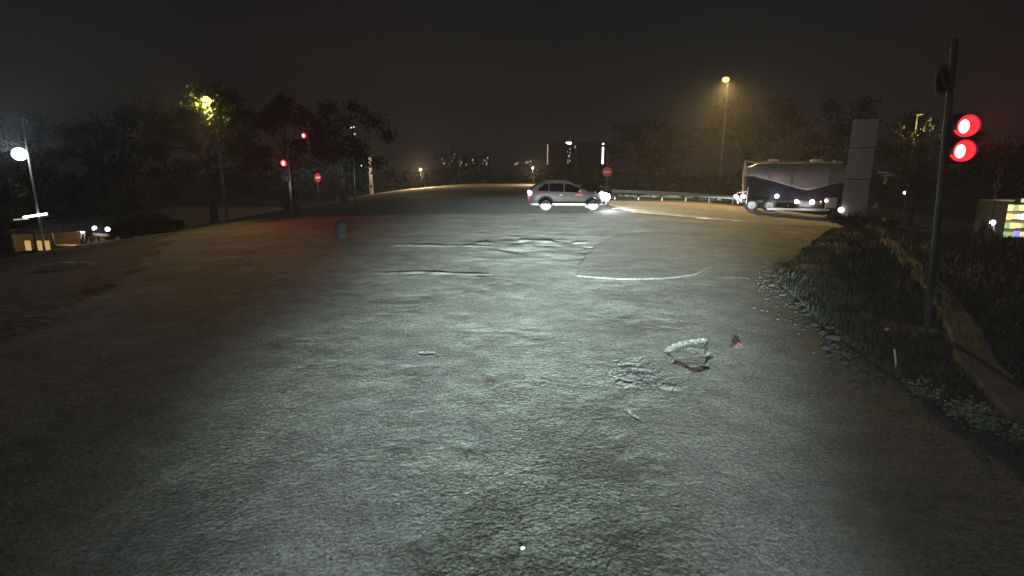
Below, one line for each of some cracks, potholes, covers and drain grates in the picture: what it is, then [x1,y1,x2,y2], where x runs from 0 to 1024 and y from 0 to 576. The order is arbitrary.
pothole [663,338,714,373]
crack [376,239,588,247]
